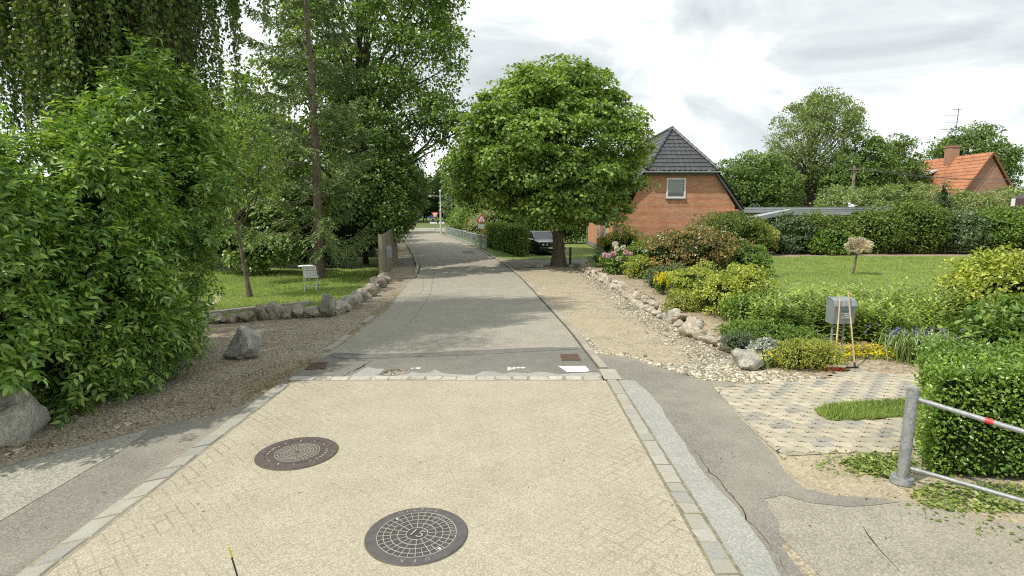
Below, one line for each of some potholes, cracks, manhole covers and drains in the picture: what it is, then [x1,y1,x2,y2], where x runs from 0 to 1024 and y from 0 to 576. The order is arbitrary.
crack [699,455,791,571]
manhole cover [254,437,339,471]
manhole cover [364,507,468,566]
